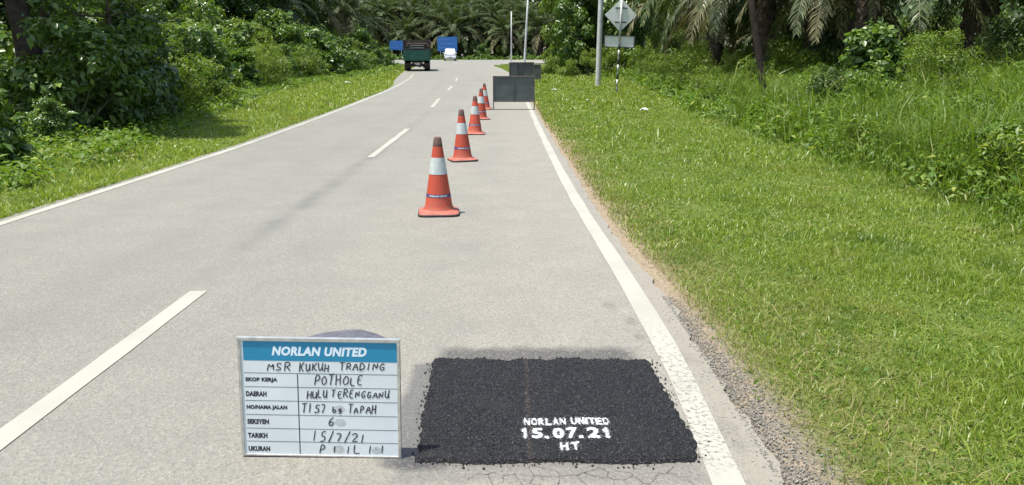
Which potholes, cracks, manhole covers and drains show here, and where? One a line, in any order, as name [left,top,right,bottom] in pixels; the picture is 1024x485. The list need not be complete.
crack [468,465,694,485]
